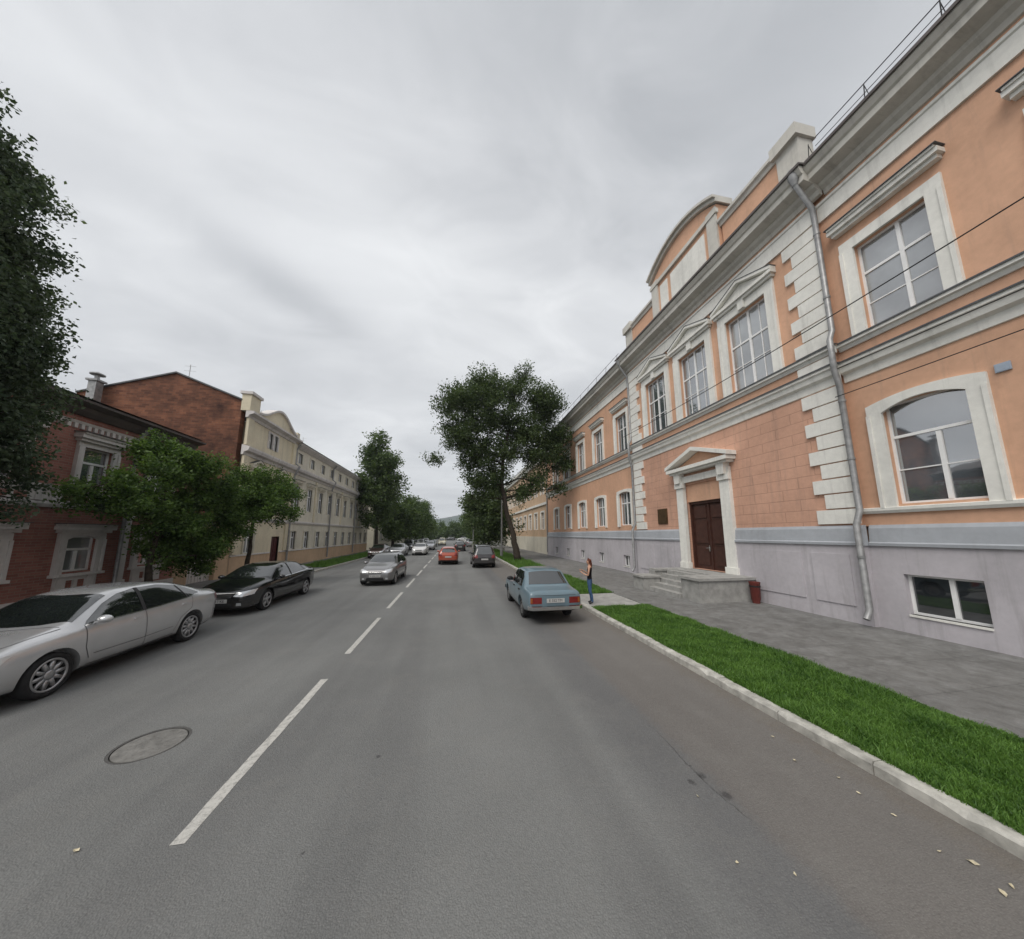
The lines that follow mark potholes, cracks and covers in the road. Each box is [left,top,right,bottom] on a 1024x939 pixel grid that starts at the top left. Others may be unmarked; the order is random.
manhole cover [104,727,192,765]
